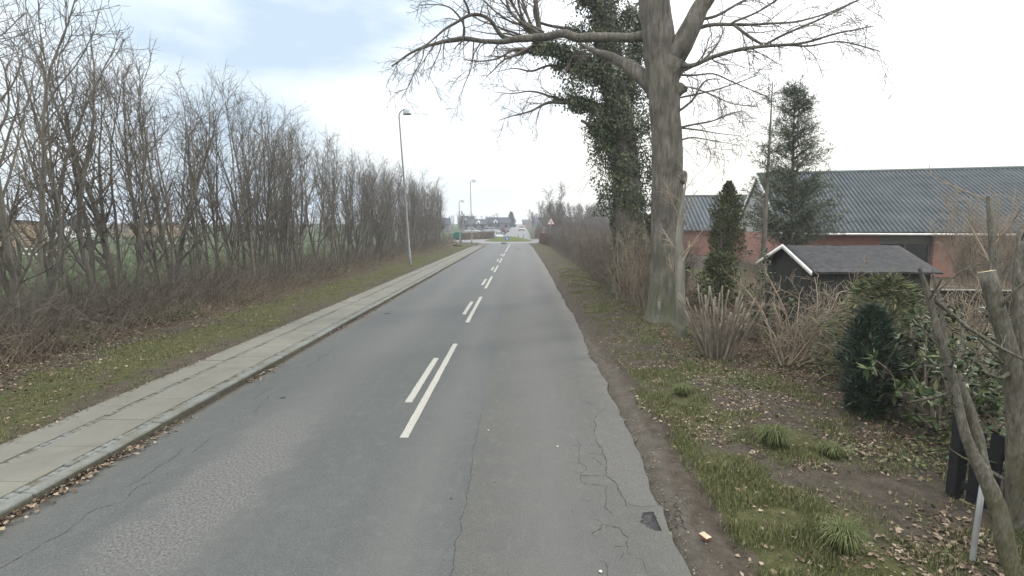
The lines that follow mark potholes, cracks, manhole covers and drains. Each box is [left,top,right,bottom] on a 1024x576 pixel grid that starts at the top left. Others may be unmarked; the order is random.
pothole [640,512,661,531]
crack [558,402,647,576]
